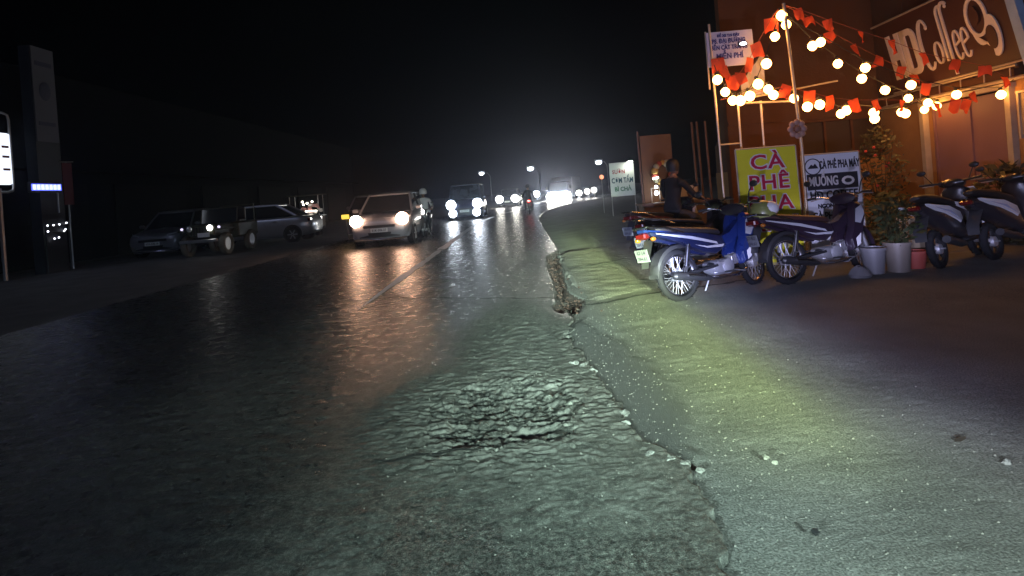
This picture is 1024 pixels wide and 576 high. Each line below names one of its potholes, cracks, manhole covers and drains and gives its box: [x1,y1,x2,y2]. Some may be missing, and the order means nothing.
pothole [546,252,584,315]
pothole [427,378,585,457]
